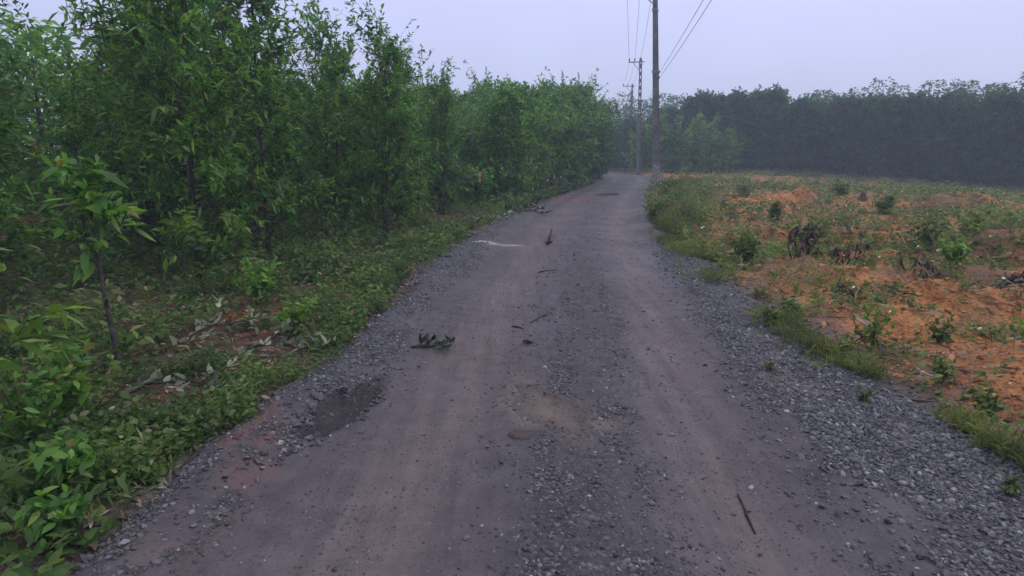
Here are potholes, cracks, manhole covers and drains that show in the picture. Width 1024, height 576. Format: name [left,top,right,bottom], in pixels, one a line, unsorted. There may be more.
pothole [286,375,389,448]
pothole [512,382,591,436]
